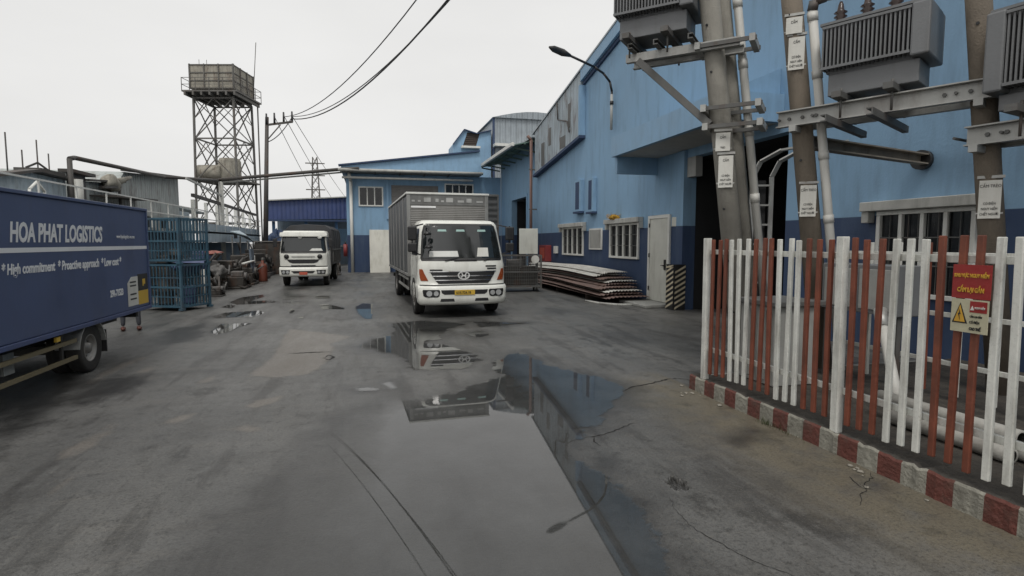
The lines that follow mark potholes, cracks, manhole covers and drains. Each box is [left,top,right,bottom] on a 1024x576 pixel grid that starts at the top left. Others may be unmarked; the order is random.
crack [669,497,791,575]
